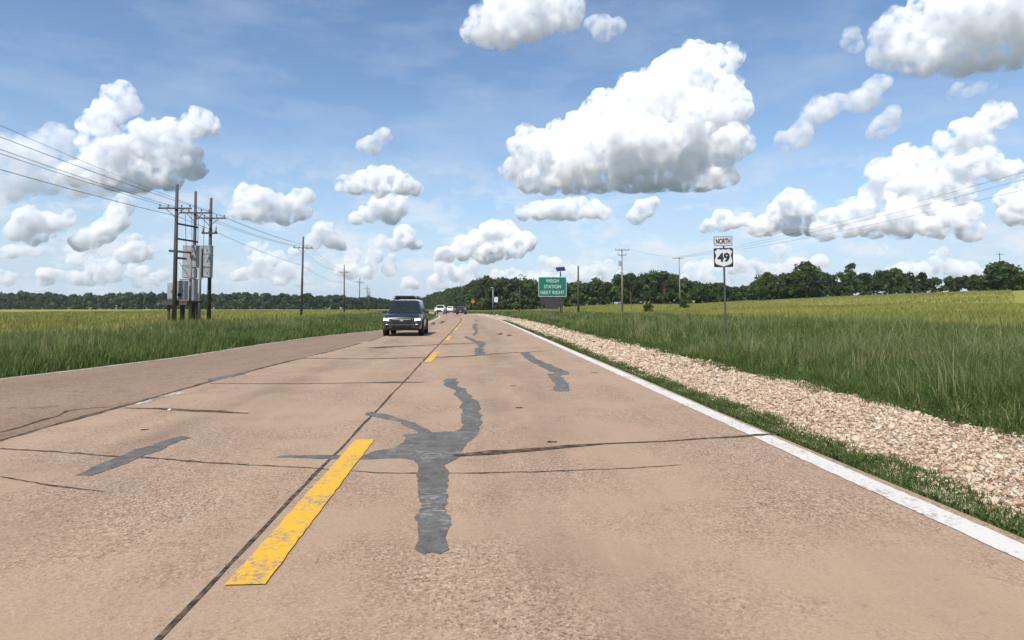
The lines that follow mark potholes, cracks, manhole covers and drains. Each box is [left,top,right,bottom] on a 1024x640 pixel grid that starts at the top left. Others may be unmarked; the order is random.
crack [0,476,105,492]
crack [0,433,782,474]
